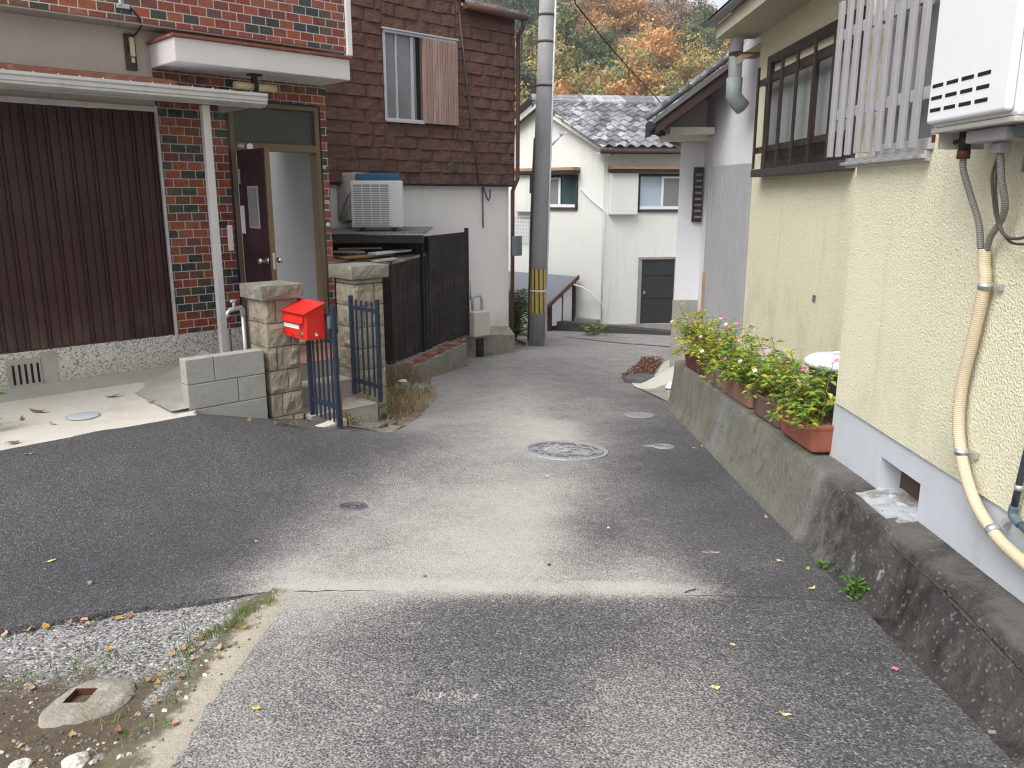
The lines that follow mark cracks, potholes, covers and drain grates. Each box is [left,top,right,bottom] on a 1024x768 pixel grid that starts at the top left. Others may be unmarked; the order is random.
manhole cover [524,441,608,461]
manhole cover [331,502,368,511]
